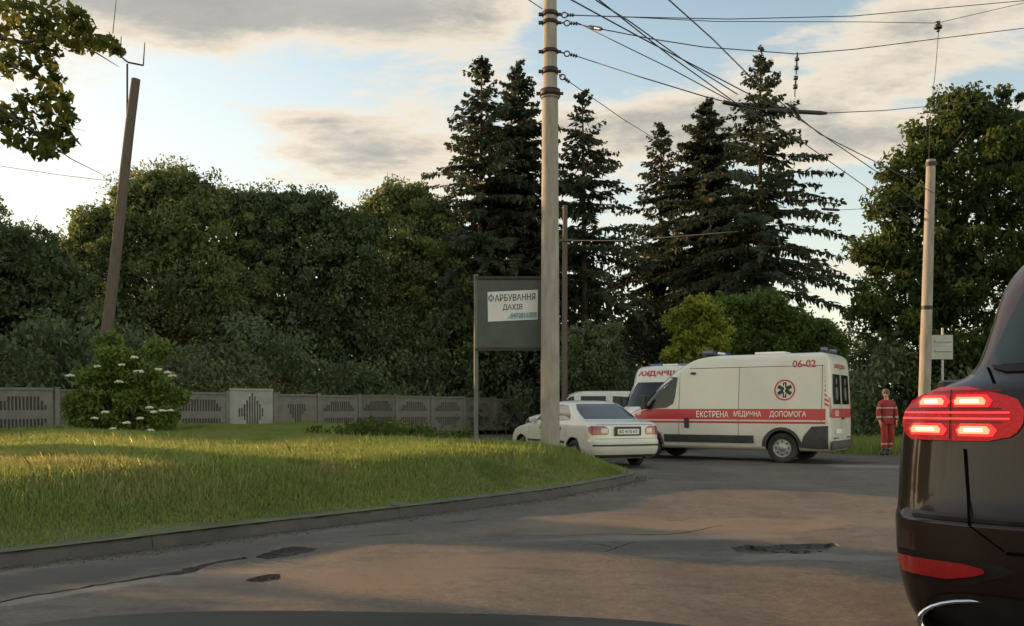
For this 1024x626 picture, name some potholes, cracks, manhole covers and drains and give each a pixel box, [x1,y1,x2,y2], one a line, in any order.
pothole [246,574,286,582]
pothole [256,546,316,559]
crack [581,525,721,552]
crack [0,557,244,603]
pothole [731,543,840,554]
